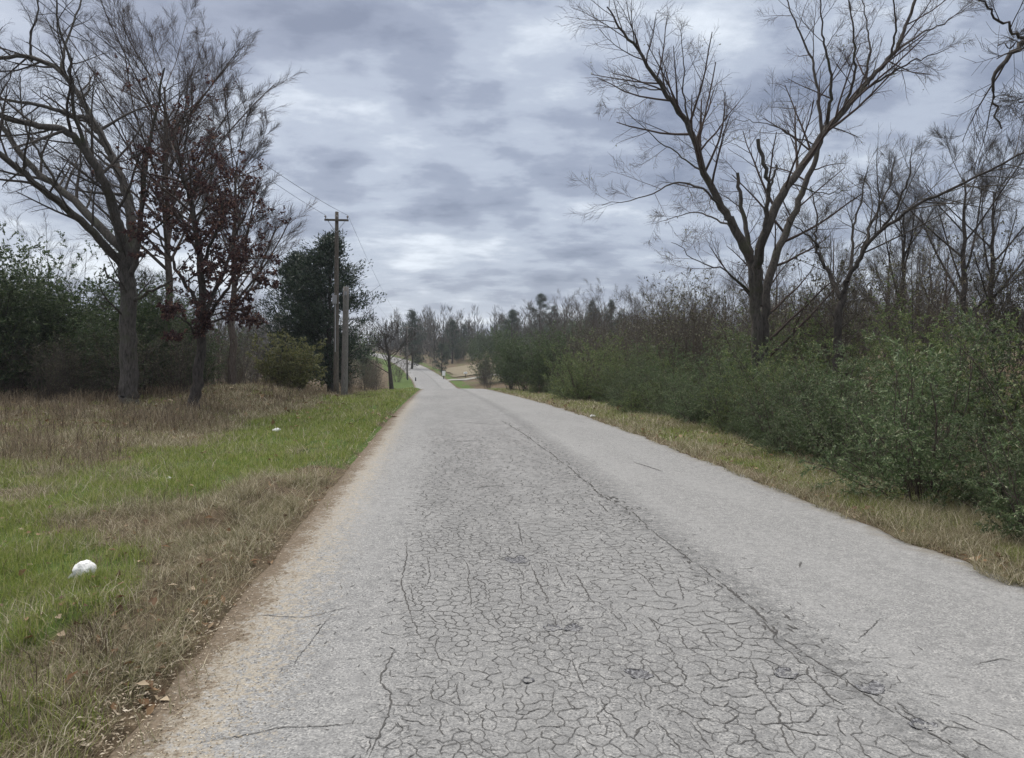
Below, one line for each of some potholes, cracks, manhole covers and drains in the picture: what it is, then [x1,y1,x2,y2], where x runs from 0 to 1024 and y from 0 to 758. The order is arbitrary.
pothole [505,555,531,563]
pothole [907,717,938,731]
crack [208,421,1024,758]
pothole [624,668,654,679]
pothole [775,666,800,678]
pothole [564,622,583,631]
pothole [855,679,885,694]
